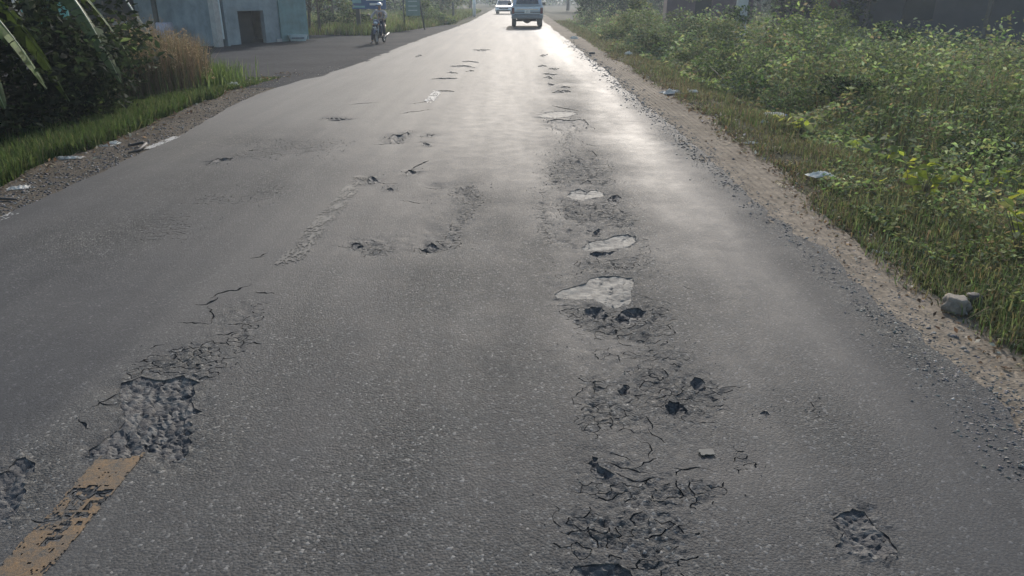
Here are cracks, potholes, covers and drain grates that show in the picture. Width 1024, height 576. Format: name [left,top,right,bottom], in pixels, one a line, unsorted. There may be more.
pothole [570,563,633,576]
pothole [833,508,898,561]
pothole [584,306,608,321]
pothole [0,457,36,525]
pothole [87,375,202,464]
crack [552,286,757,576]
crack [78,285,272,429]
pothole [614,308,646,325]
pothole [665,400,688,419]
pothole [388,132,410,144]
